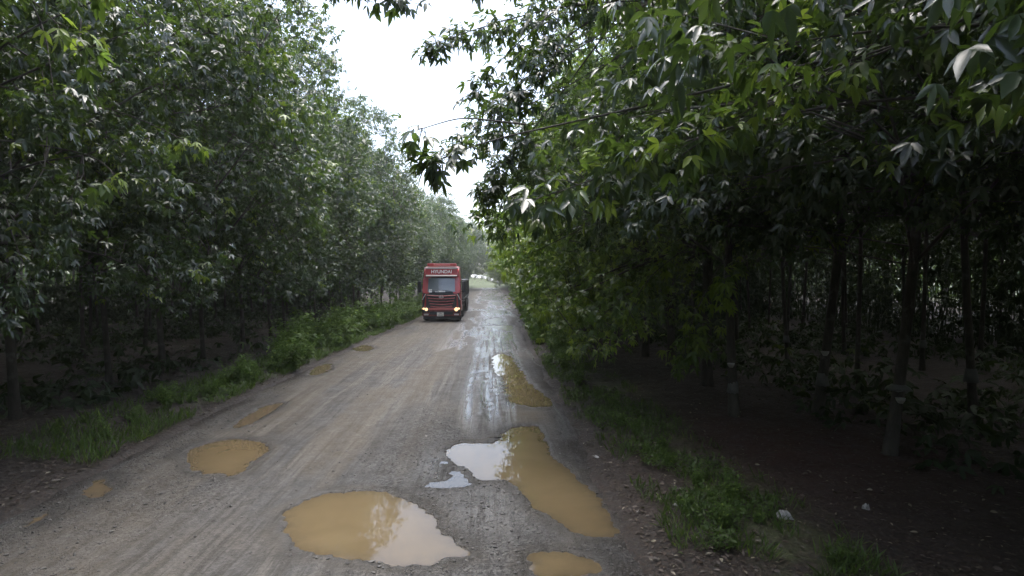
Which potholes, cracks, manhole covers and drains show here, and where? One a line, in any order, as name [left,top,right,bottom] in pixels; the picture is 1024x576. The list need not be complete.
pothole [280,489,472,567]
pothole [490,353,554,407]
pothole [308,363,334,375]
pothole [16,509,51,528]
pothole [422,470,473,488]
pothole [445,425,620,537]
pothole [230,402,284,428]
pothole [525,549,604,576]
pothole [79,476,114,498]
pothole [184,438,271,477]
